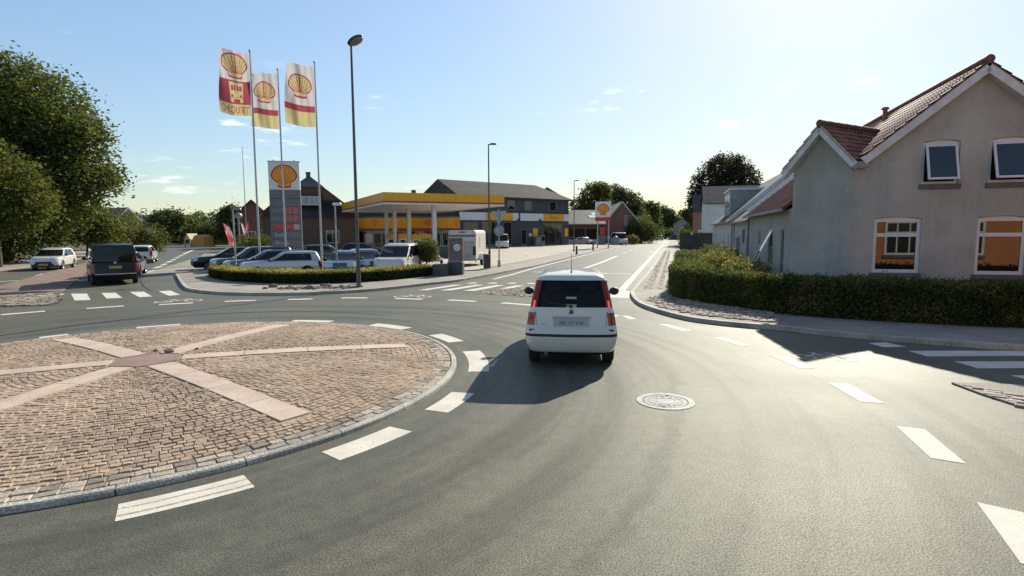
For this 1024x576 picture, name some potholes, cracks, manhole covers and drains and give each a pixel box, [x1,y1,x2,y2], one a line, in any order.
manhole cover [636,393,695,410]
